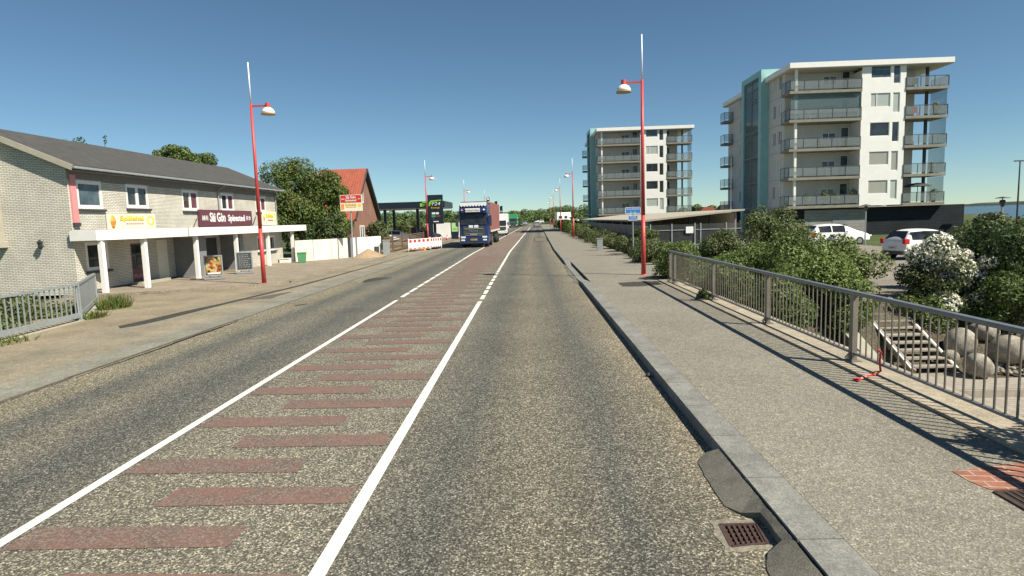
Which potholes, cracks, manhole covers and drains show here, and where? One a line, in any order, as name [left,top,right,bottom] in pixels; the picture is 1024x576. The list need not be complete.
drain grate [993,489,1024,510]
drain grate [718,522,769,547]
